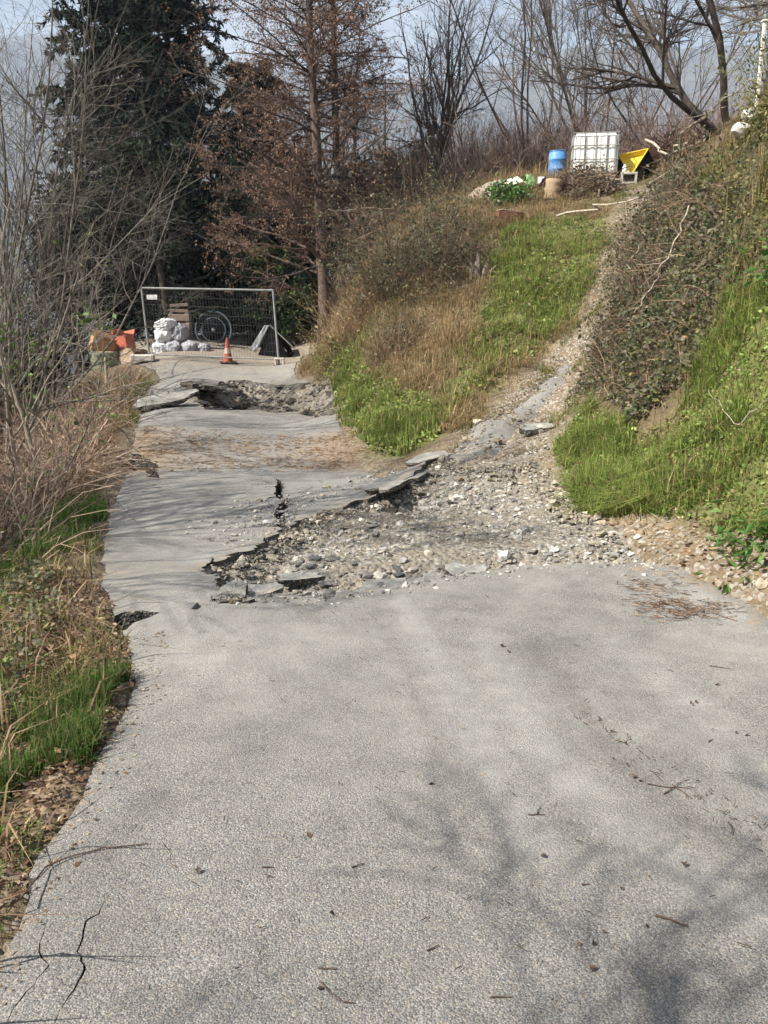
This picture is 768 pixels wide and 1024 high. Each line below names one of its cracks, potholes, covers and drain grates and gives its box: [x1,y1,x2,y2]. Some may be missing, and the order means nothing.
crack [274,480,288,527]
pothole [187,379,335,418]
pothole [117,612,151,630]
pothole [201,449,668,597]
